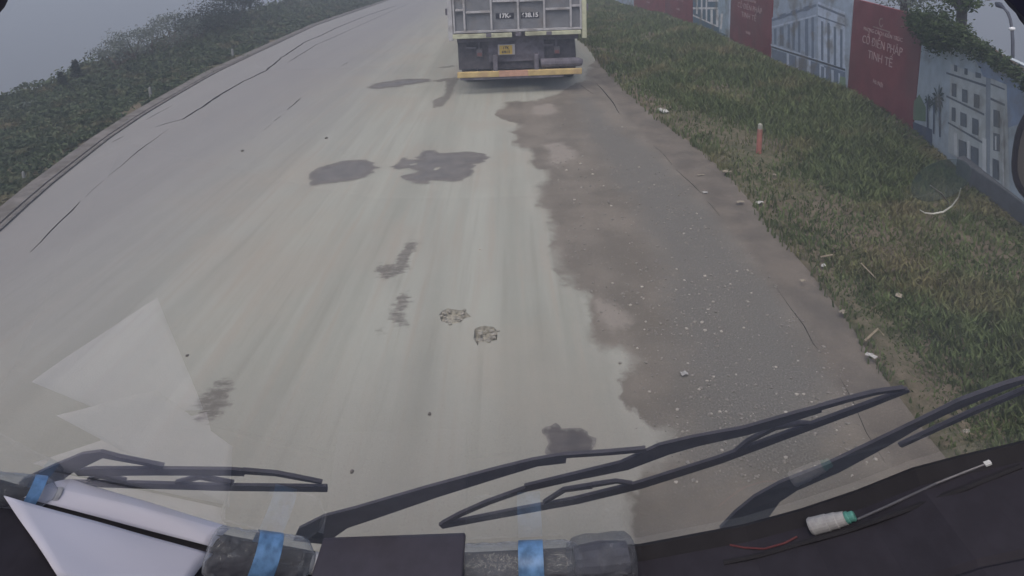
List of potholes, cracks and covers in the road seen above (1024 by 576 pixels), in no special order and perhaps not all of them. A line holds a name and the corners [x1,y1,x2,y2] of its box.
pothole [439,309,471,325]
crack [37,180,104,246]
crack [160,5,405,126]
pothole [474,326,500,345]
